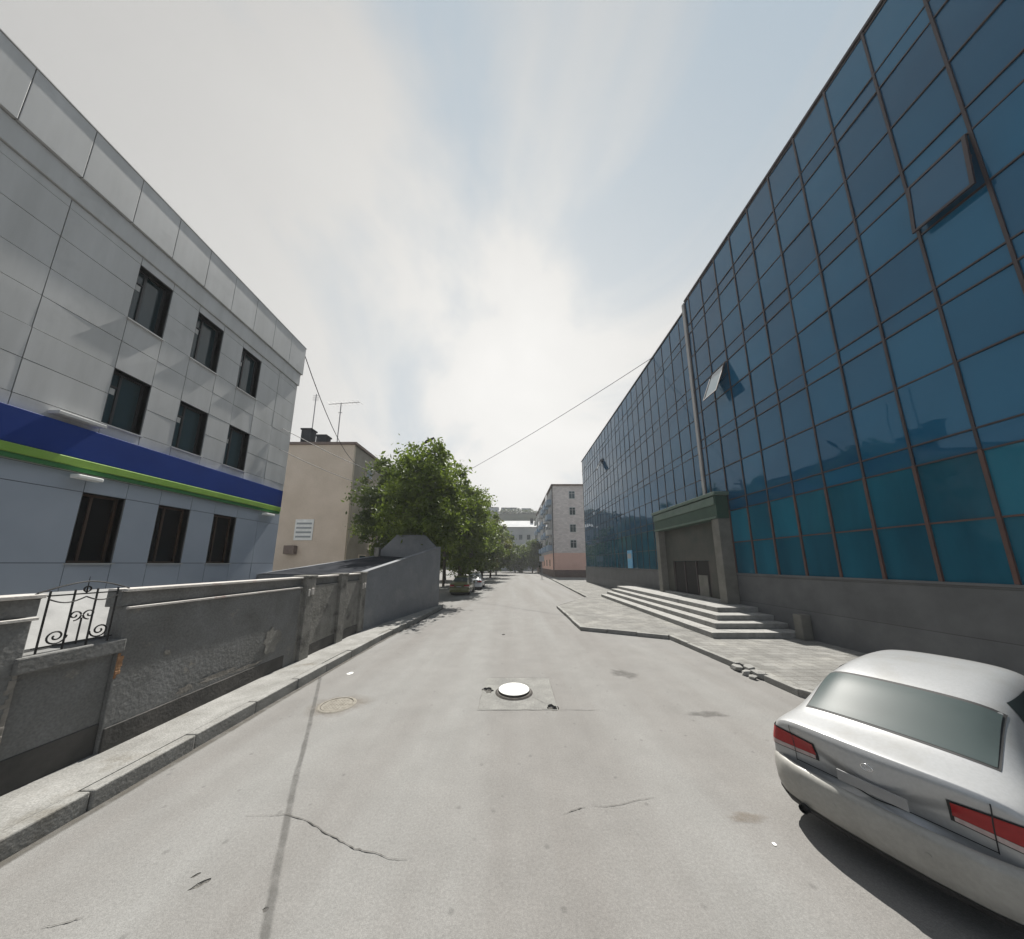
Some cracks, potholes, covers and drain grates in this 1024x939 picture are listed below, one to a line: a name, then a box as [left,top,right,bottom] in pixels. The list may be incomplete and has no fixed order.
crack [276,814,406,859]
manhole cover [495,683,533,701]
manhole cover [316,697,357,713]
